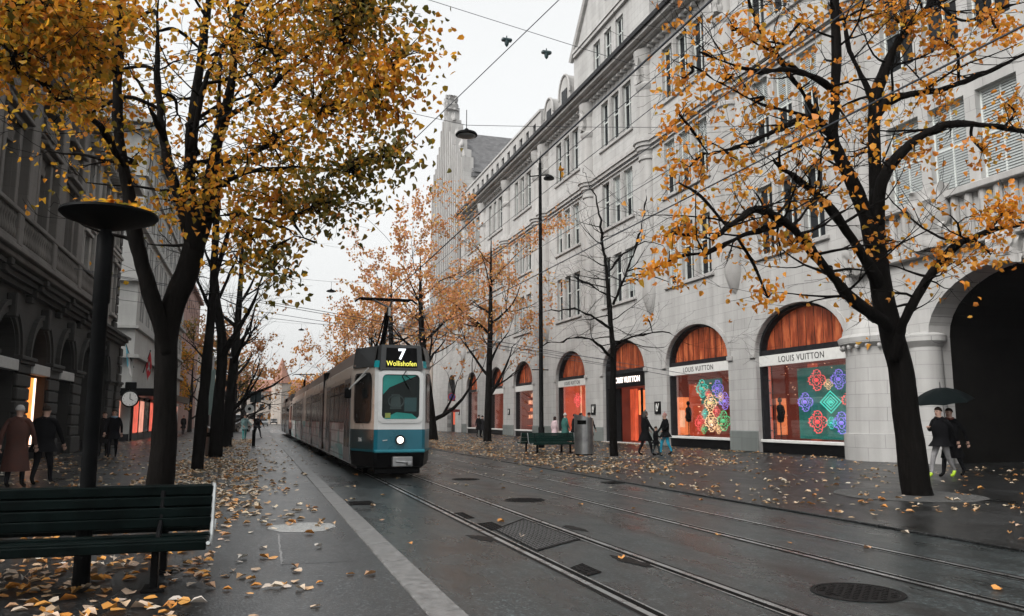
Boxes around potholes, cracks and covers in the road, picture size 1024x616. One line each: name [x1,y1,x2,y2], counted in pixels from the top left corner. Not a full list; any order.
manhole cover [810,582,908,602]
